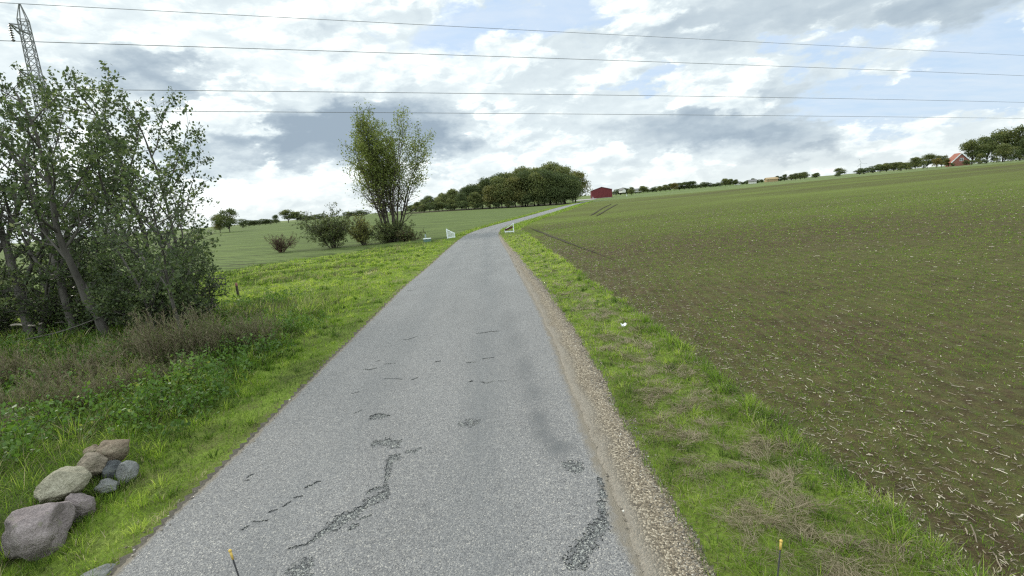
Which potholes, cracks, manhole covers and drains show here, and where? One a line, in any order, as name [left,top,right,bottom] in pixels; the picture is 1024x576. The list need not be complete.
crack [241,447,422,550]
